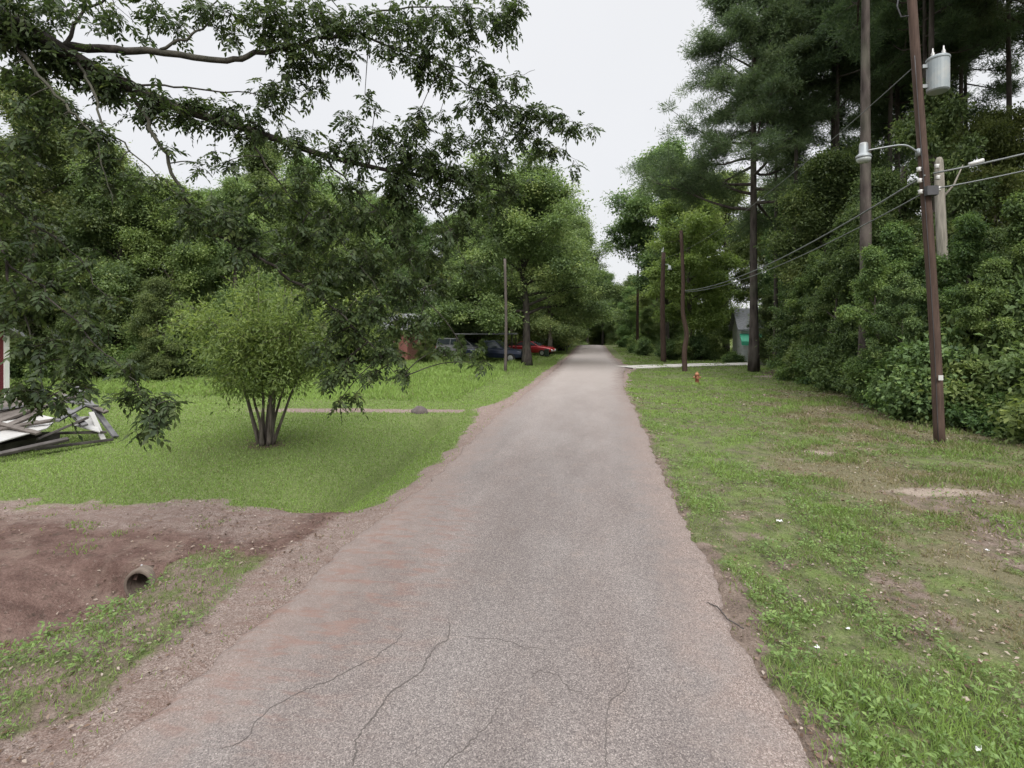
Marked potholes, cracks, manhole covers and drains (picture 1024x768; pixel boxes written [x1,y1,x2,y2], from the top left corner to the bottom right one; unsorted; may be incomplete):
crack [604,656,630,763]
crack [222,618,545,768]
